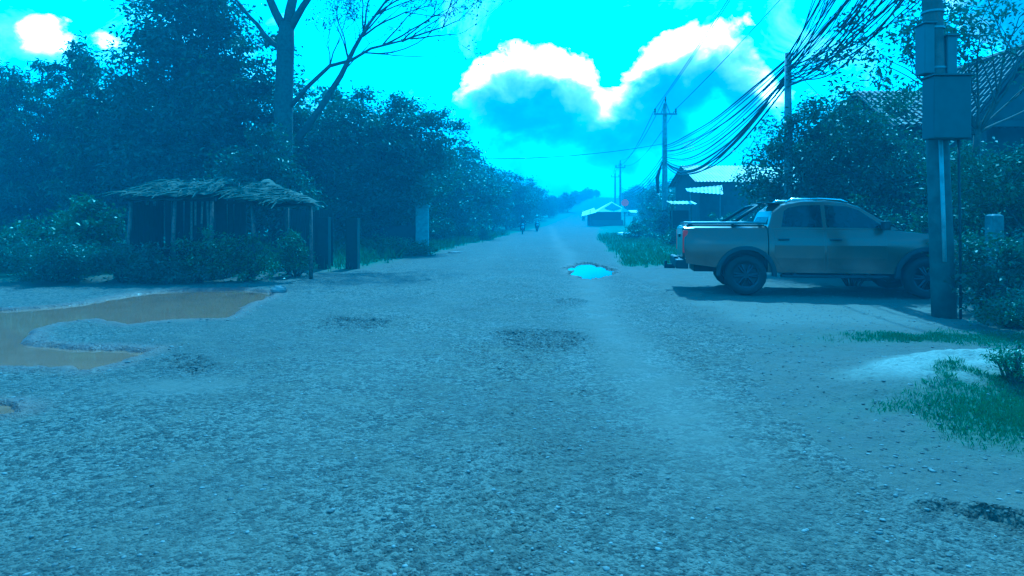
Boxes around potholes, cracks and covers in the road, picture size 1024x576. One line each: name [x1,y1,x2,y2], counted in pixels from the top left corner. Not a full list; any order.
pothole [154,353,227,377]
pothole [549,298,591,306]
pothole [0,400,26,415]
pothole [0,287,276,370]
pothole [326,317,394,328]
pothole [482,328,593,351]
pothole [561,262,619,279]
